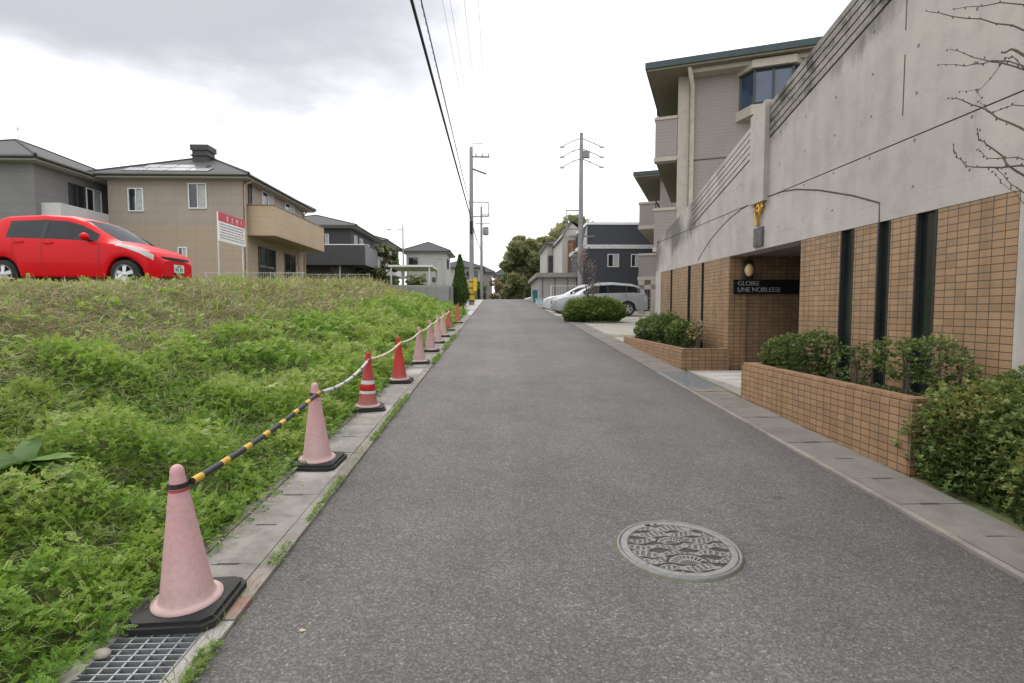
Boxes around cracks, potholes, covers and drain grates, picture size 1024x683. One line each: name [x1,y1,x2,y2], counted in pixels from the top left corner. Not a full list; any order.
manhole cover [617,520,743,581]
drain grate [69,632,204,683]
